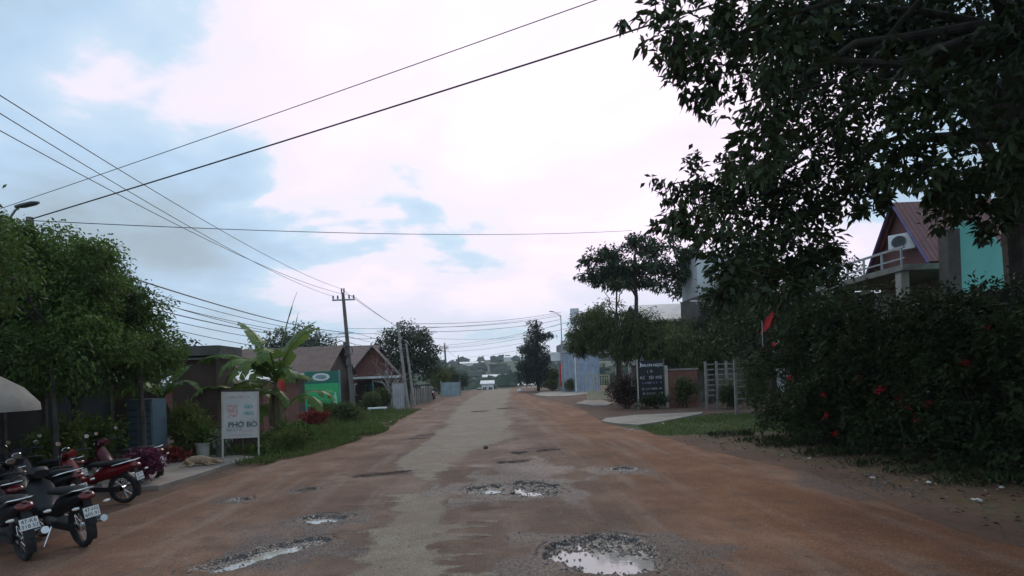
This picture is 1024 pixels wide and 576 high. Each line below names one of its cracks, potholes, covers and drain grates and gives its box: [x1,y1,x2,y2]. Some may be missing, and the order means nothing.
pothole [214,496,254,504]
pothole [460,483,515,495]
pothole [533,531,670,576]
pothole [602,465,643,473]
pothole [286,513,355,526]
pothole [499,480,569,500]
pothole [172,534,344,576]
